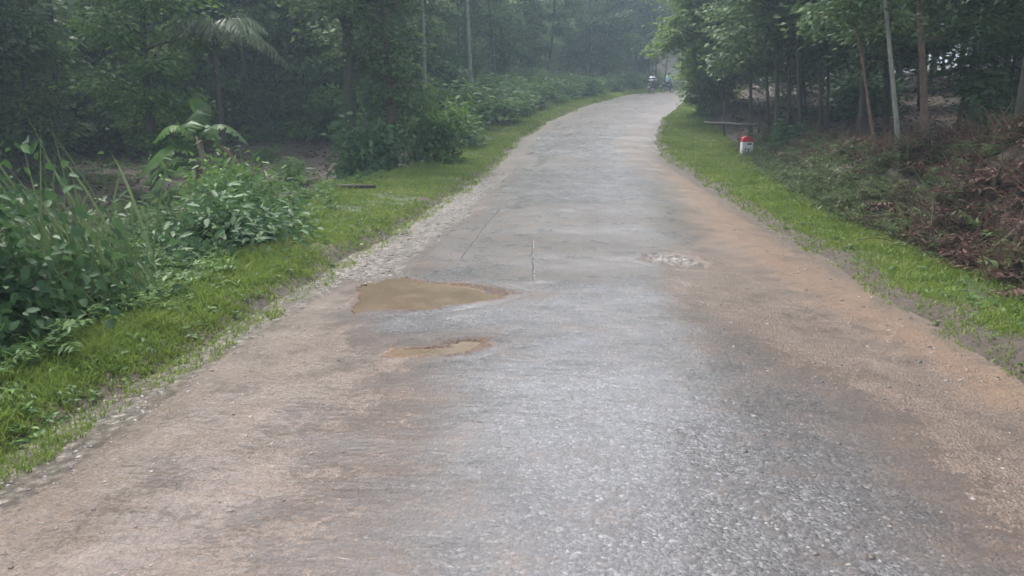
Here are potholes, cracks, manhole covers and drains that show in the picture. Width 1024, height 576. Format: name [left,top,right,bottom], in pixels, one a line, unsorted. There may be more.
crack [443,205,547,284]
pothole [362,331,513,364]
pothole [626,249,726,272]
pothole [338,274,532,317]
